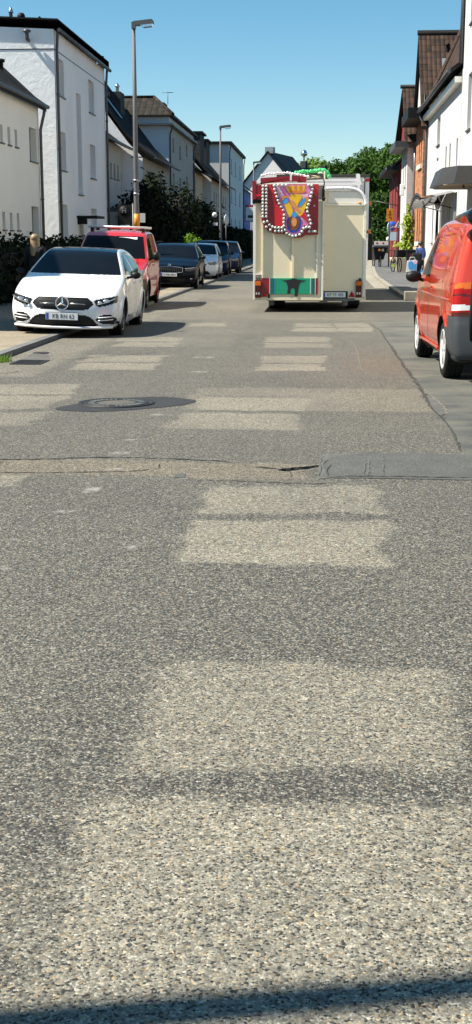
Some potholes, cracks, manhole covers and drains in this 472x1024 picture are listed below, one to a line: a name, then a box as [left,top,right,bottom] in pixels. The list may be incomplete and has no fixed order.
manhole cover [78,398,155,408]
